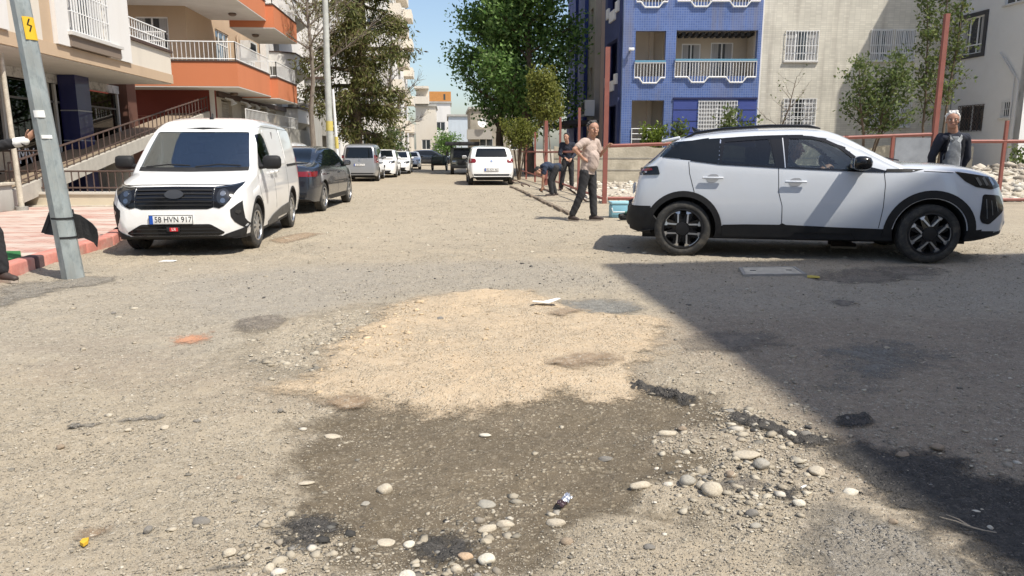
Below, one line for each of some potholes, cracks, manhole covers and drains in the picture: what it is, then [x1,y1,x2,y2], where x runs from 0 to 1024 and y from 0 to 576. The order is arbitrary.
manhole cover [738,266,807,277]
pothole [275,384,730,576]
